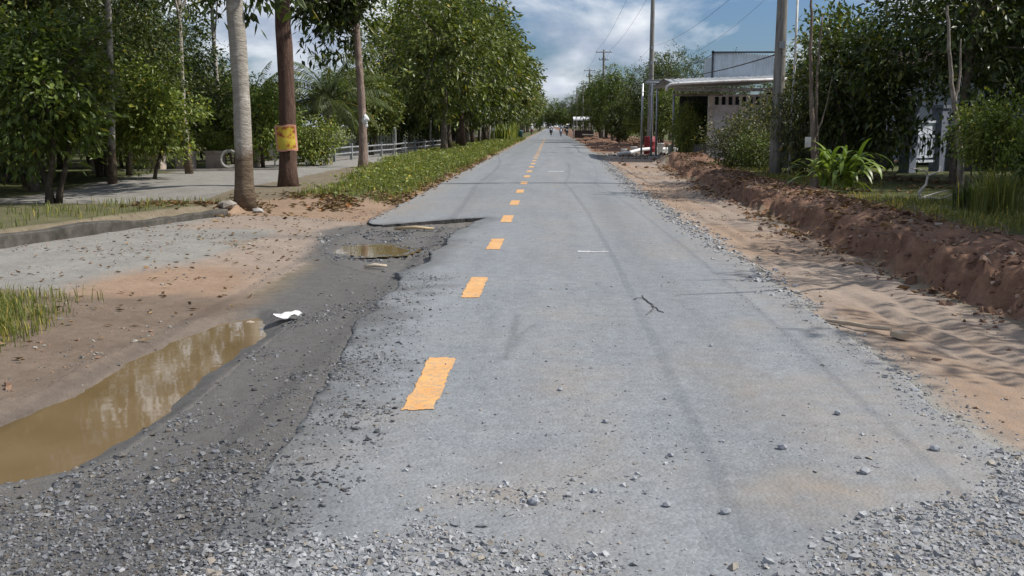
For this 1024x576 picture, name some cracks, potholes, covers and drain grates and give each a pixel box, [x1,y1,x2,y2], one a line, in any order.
pothole [312,222,473,278]
